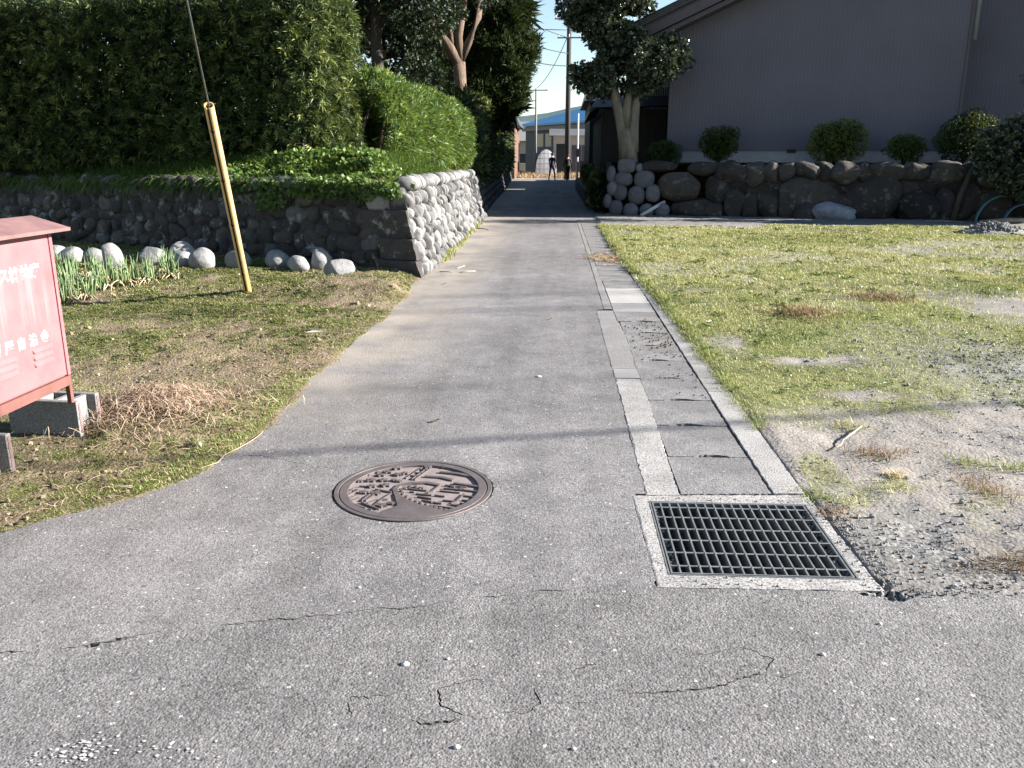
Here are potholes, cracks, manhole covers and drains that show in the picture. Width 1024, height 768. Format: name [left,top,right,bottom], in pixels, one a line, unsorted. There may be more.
crack [347,647,803,725]
crack [0,587,585,654]
manhole cover [334,461,492,523]
drain grate [649,501,860,580]
